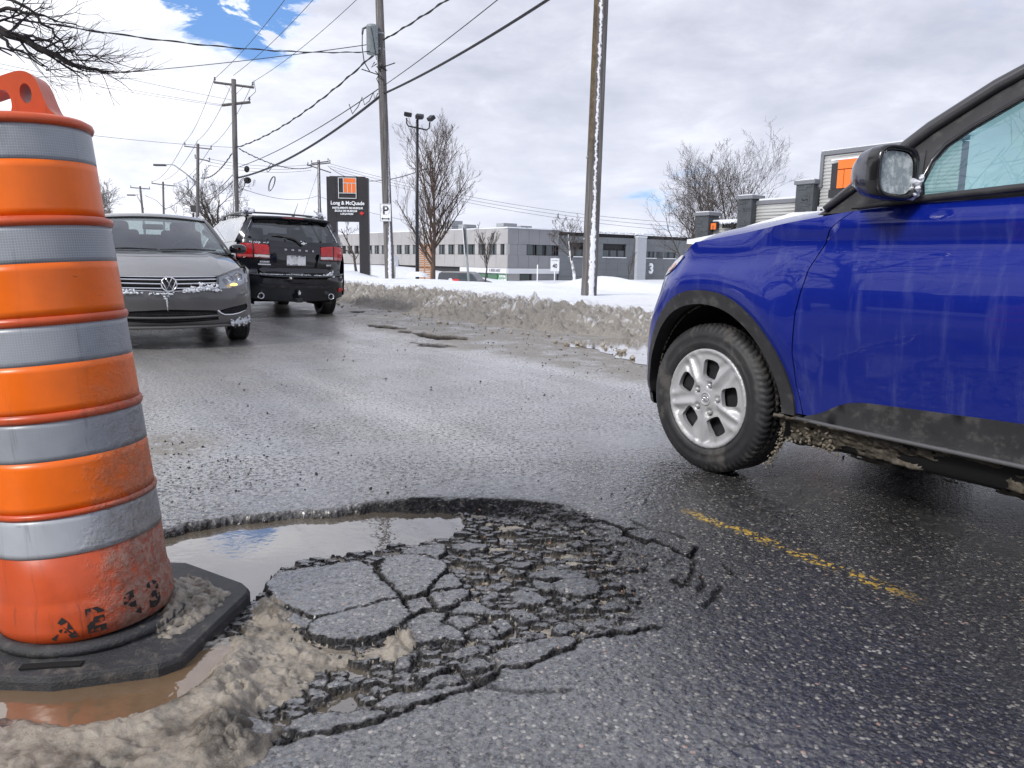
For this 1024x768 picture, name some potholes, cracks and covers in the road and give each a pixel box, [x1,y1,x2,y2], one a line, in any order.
pothole [404,341,461,349]
pothole [396,330,471,341]
crack [203,519,736,746]
pothole [163,495,699,599]
